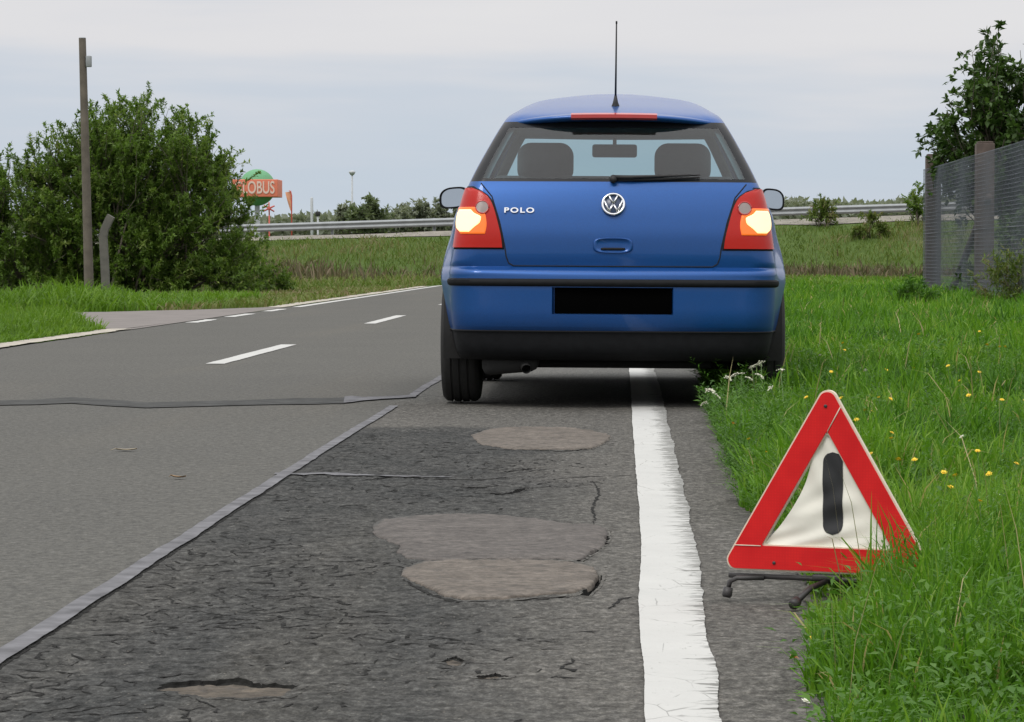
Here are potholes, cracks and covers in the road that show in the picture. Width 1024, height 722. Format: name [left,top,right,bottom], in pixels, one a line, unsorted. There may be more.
crack [513,475,638,608]
crack [0,435,613,722]
pothole [143,674,311,700]
